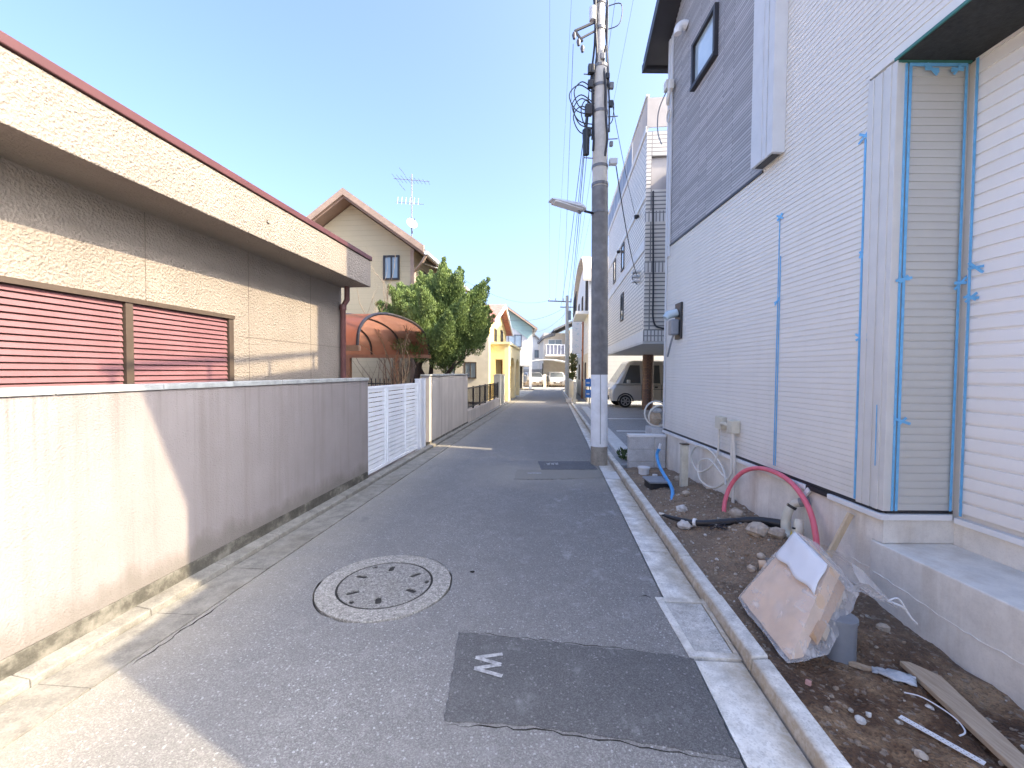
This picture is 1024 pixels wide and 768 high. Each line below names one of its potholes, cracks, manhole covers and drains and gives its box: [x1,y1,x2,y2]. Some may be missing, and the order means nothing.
manhole cover [314,555,451,623]
